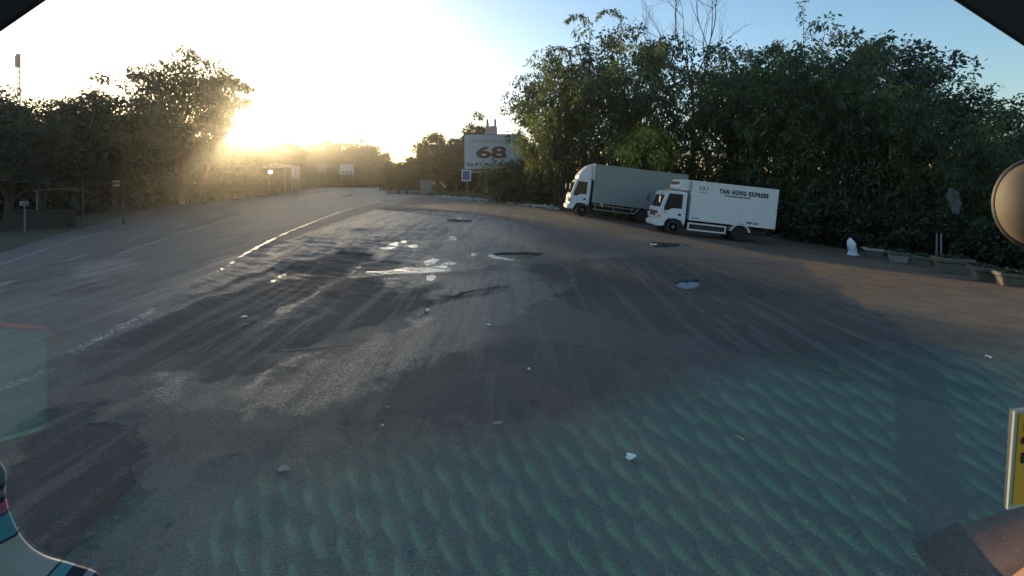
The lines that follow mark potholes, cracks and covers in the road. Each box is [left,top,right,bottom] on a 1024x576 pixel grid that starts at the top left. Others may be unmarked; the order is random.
pothole [670,279,706,290]
